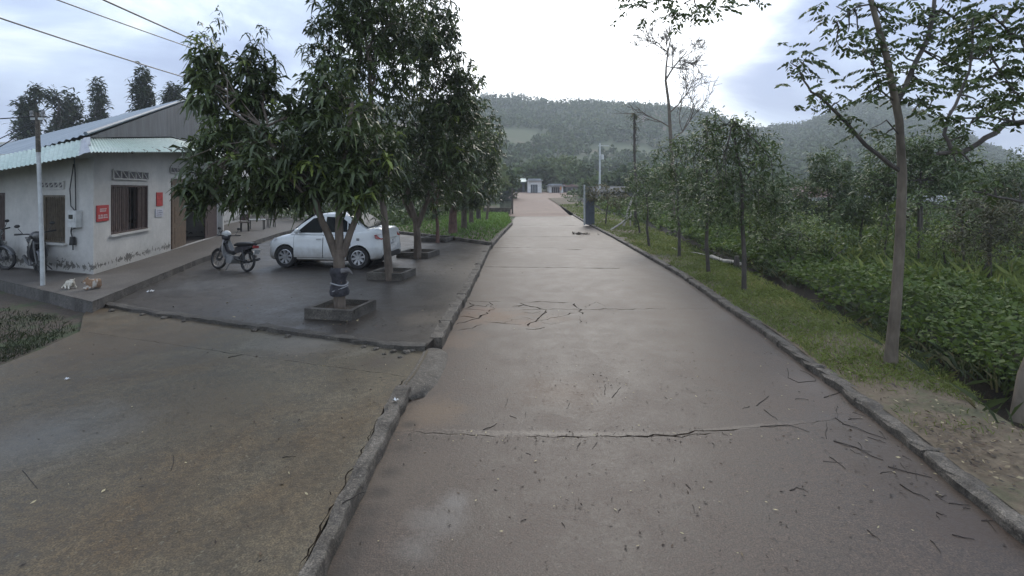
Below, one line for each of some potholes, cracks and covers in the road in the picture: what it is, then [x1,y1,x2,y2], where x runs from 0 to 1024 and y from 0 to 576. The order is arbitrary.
crack [456,301,653,330]
